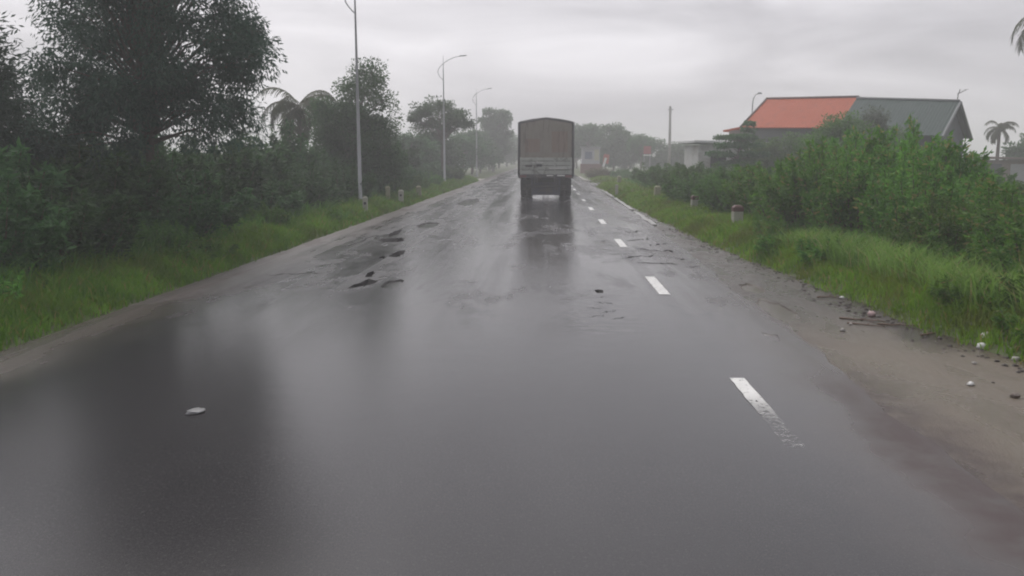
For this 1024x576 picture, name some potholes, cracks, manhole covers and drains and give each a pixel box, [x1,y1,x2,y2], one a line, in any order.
pothole [347,279,377,289]
crack [605,231,688,265]
pothole [381,279,404,289]
